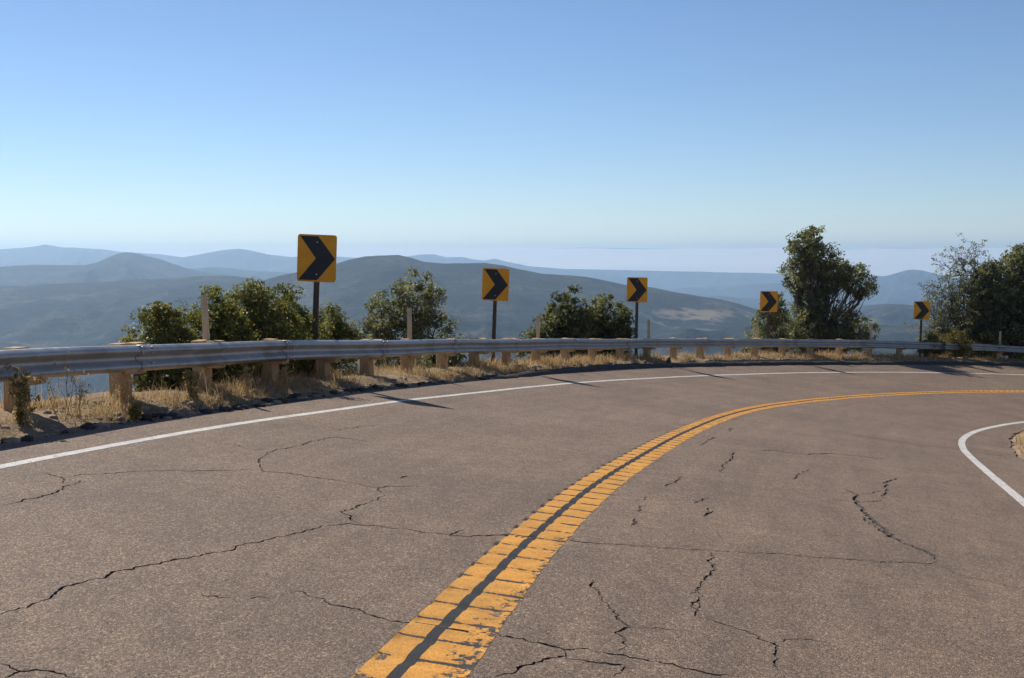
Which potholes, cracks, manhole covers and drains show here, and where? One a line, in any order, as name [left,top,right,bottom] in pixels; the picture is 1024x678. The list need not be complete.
crack [295,553,817,677]
crack [3,664,84,678]
crack [846,478,1010,587]
crack [0,425,935,615]
